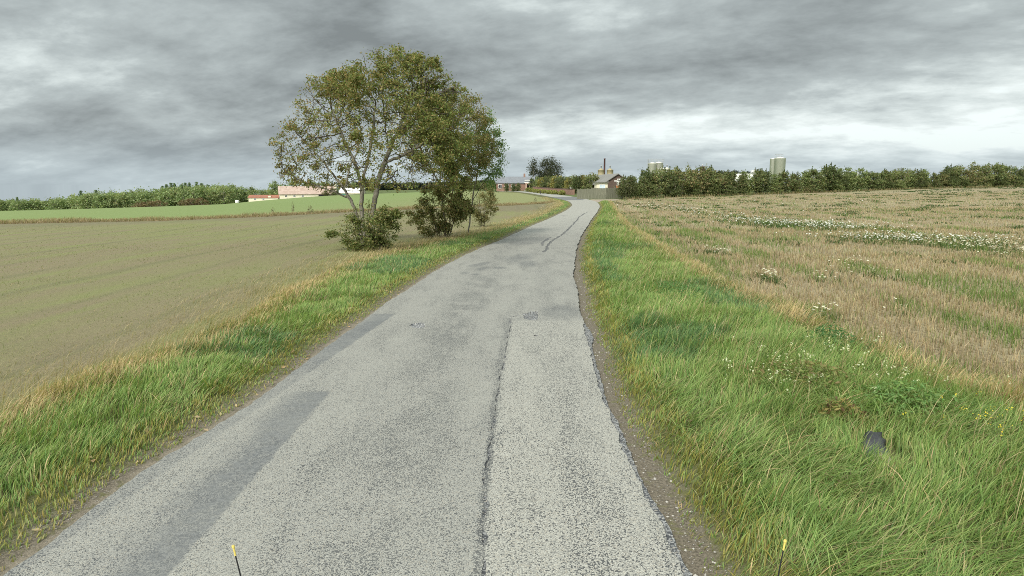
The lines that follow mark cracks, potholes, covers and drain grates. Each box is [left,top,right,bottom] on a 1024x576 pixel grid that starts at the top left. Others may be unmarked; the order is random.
pothole [523,311,538,320]
